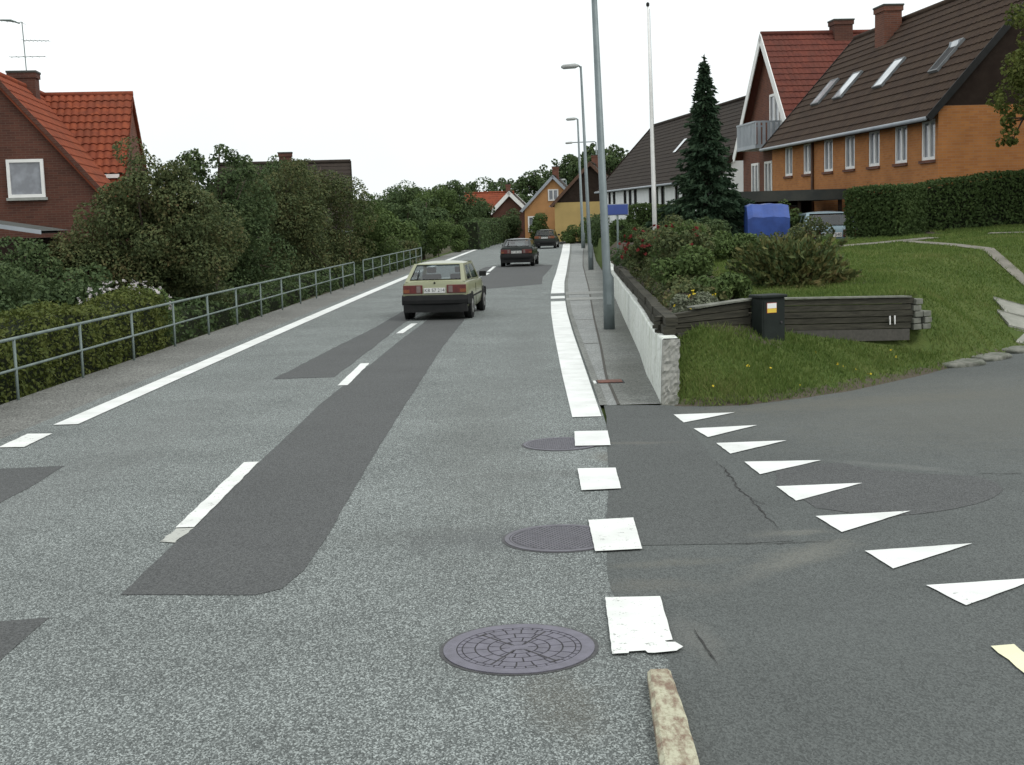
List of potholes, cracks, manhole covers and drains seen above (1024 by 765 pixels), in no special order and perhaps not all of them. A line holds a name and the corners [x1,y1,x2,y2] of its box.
manhole cover [439,624,599,675]
manhole cover [521,437,598,451]
manhole cover [502,524,595,553]
crack [716,461,833,544]
